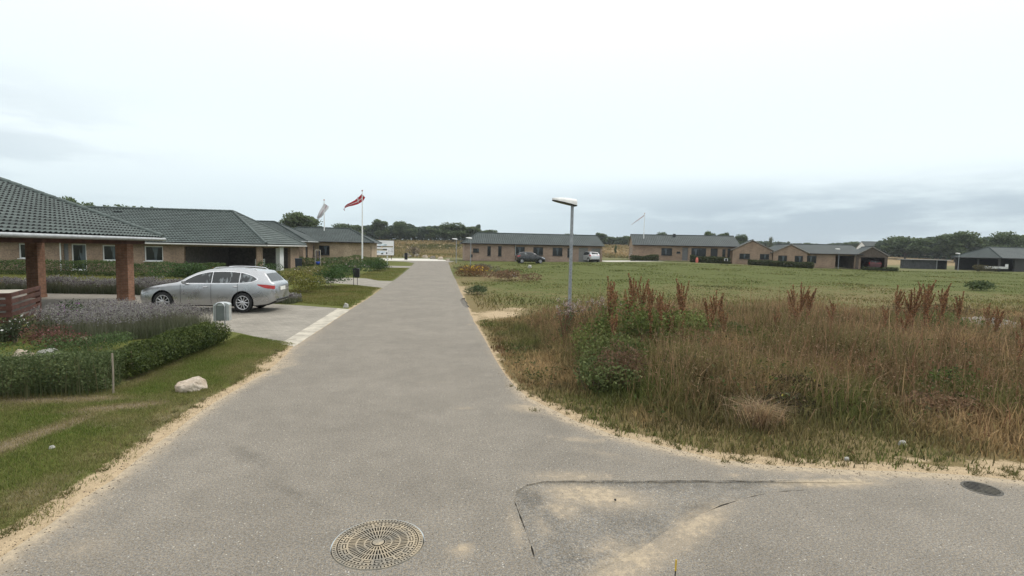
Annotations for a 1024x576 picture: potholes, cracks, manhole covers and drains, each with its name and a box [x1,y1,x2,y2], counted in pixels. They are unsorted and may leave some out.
manhole cover [331,519,424,570]
